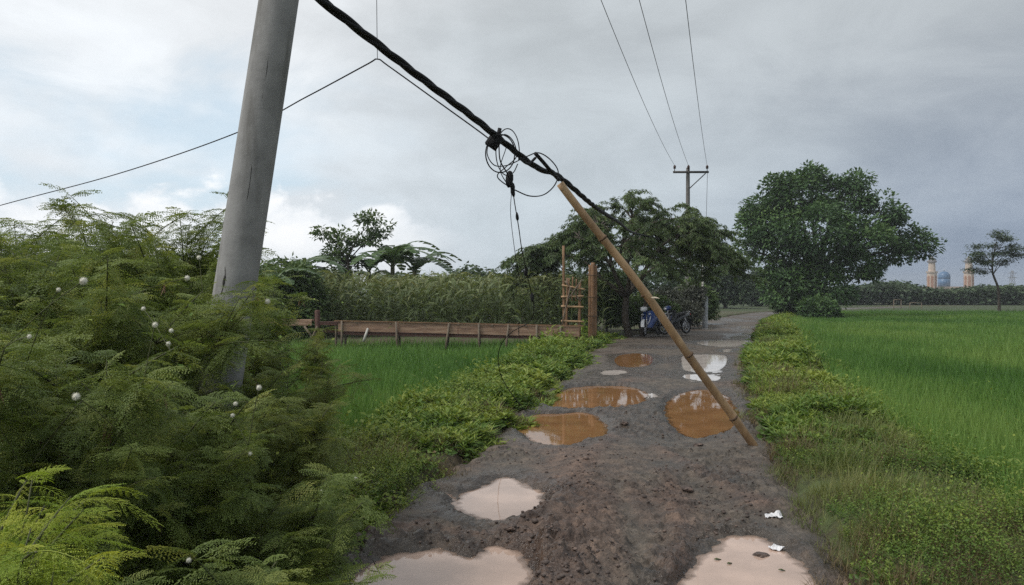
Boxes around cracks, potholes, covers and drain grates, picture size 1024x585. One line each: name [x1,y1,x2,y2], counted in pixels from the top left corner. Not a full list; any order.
pothole [592,368,636,376]
pothole [674,354,735,373]
pothole [502,408,623,448]
pothole [321,526,563,585]
pothole [429,469,568,528]
pothole [644,520,849,585]
pothole [650,386,752,441]
pothole [606,353,661,369]
pothole [536,381,661,410]
pothole [674,373,730,382]
